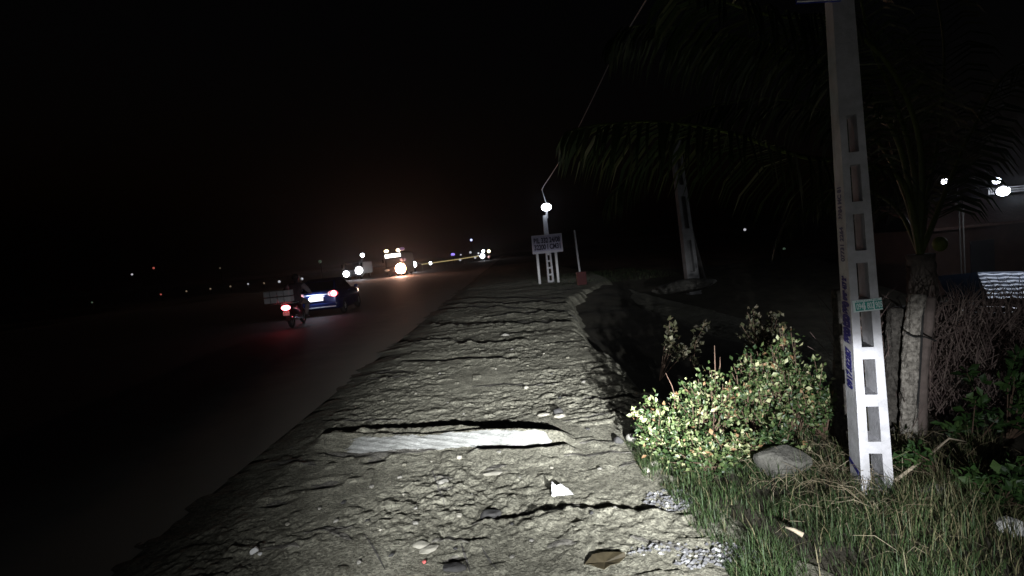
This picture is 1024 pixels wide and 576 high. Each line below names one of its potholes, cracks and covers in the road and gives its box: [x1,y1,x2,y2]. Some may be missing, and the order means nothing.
crack [350,375,416,383]
